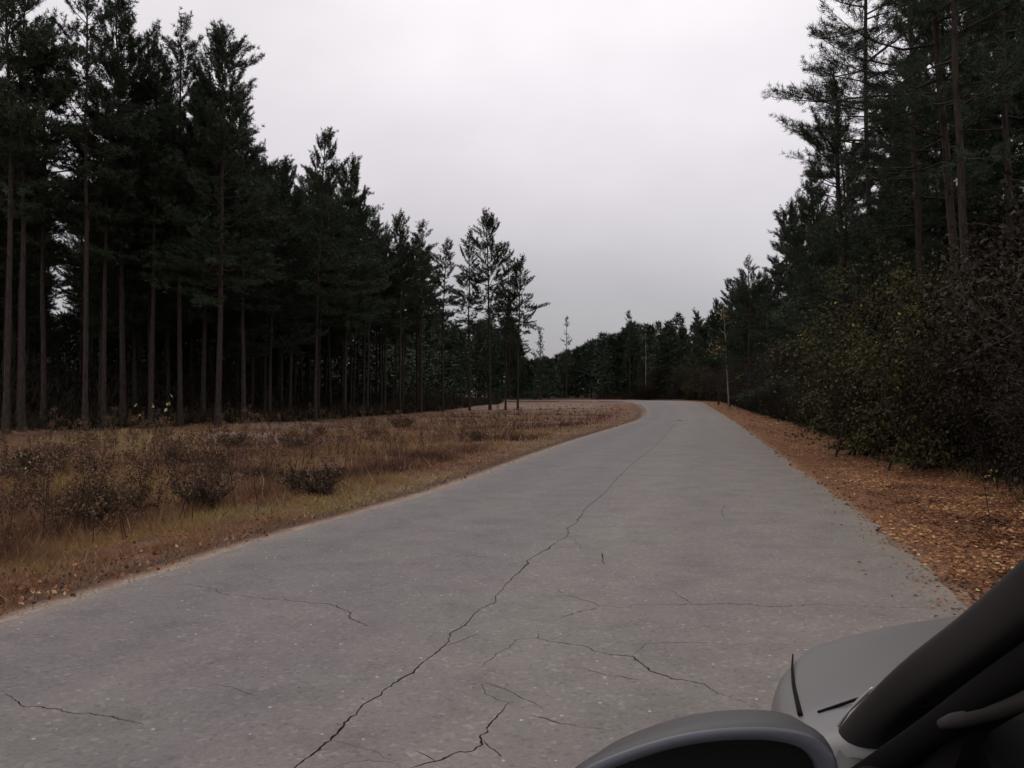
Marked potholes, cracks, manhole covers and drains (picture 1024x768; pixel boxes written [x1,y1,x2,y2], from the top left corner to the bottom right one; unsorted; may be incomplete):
crack [294,432,668,768]
crack [484,635,756,705]
crack [4,693,144,725]
crack [557,588,941,618]
